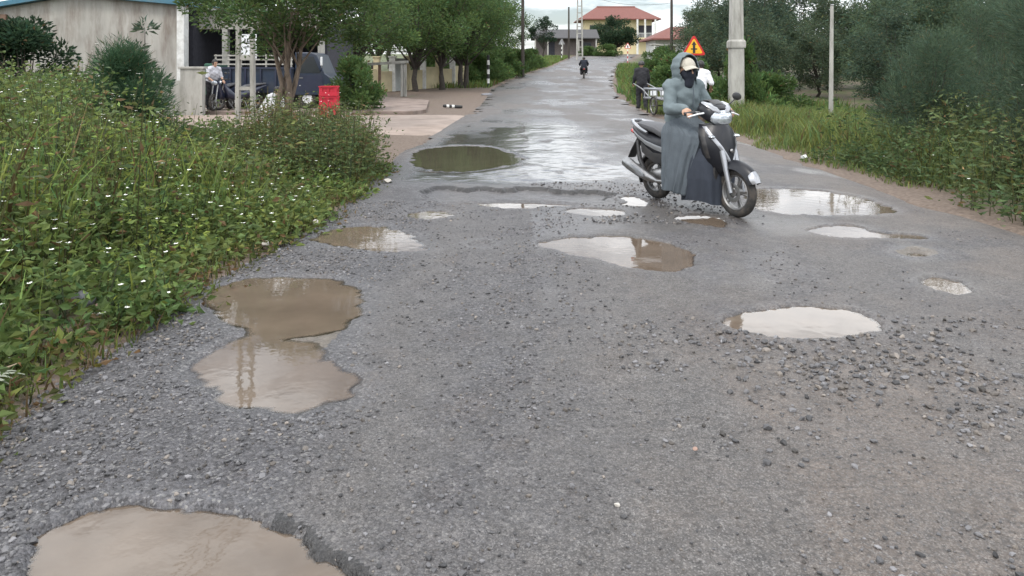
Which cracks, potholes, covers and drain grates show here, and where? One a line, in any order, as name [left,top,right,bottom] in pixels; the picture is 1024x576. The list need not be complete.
pothole [172,271,382,423]
pothole [799,222,938,240]
pothole [416,185,628,209]
pothole [0,489,385,576]
pothole [666,212,735,228]
pothole [734,186,906,217]
pothole [910,273,982,296]
pothole [528,232,704,274]
pothole [557,205,633,217]
pothole [403,144,532,173]
pothole [399,209,461,220]
pothole [294,223,440,254]
